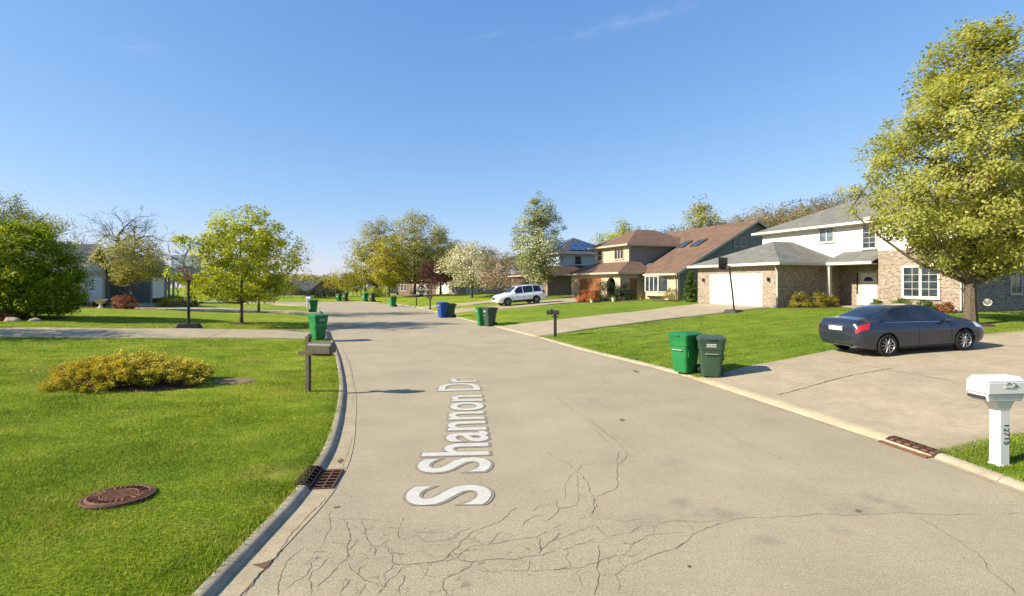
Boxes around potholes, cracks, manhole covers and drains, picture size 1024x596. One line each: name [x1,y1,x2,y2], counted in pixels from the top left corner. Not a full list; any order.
crack [243,379,1018,595]
drain grate [294,465,344,490]
manhole cover [78,484,157,510]
drain grate [878,436,946,458]
